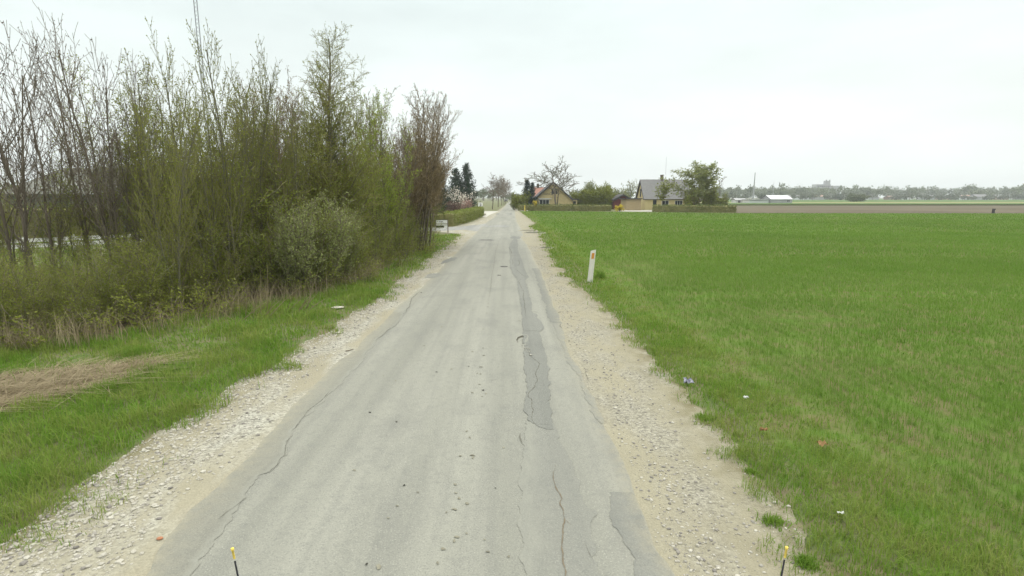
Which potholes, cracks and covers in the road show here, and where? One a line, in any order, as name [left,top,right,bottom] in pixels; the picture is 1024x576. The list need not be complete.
crack [553,471,569,576]
pothole [507,334,529,347]
